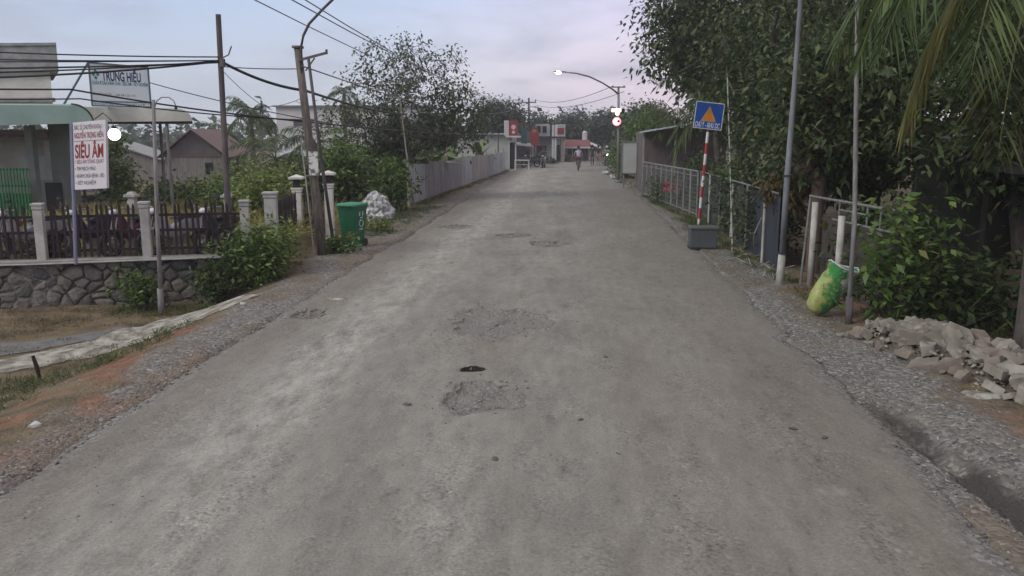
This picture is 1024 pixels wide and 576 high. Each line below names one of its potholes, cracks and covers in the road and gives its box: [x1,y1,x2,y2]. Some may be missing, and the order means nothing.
pothole [285,308,330,319]
pothole [431,373,543,424]
pothole [430,302,578,349]
